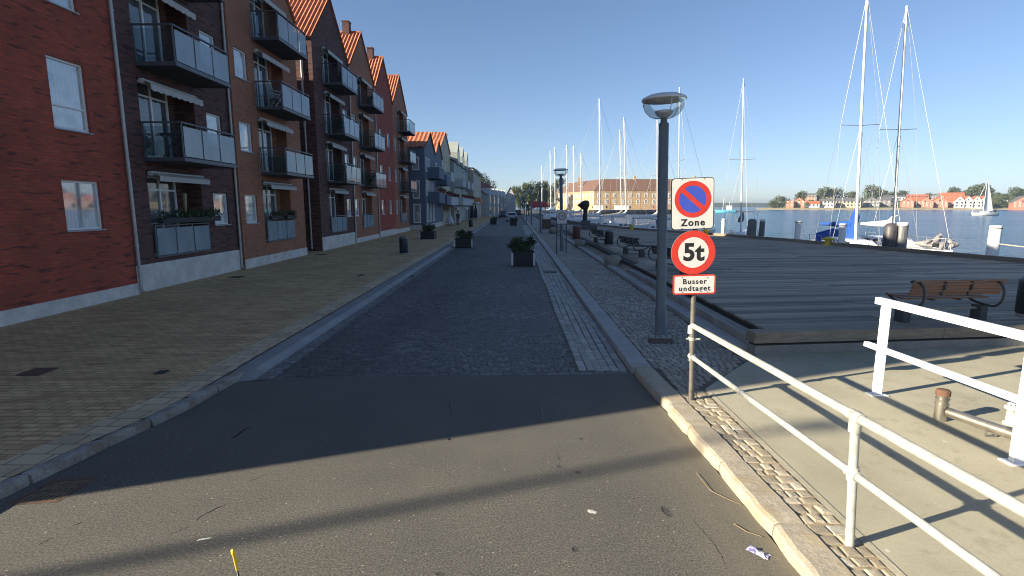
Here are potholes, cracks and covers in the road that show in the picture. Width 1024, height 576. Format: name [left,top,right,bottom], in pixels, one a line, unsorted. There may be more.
manhole cover [16,368,58,376]
